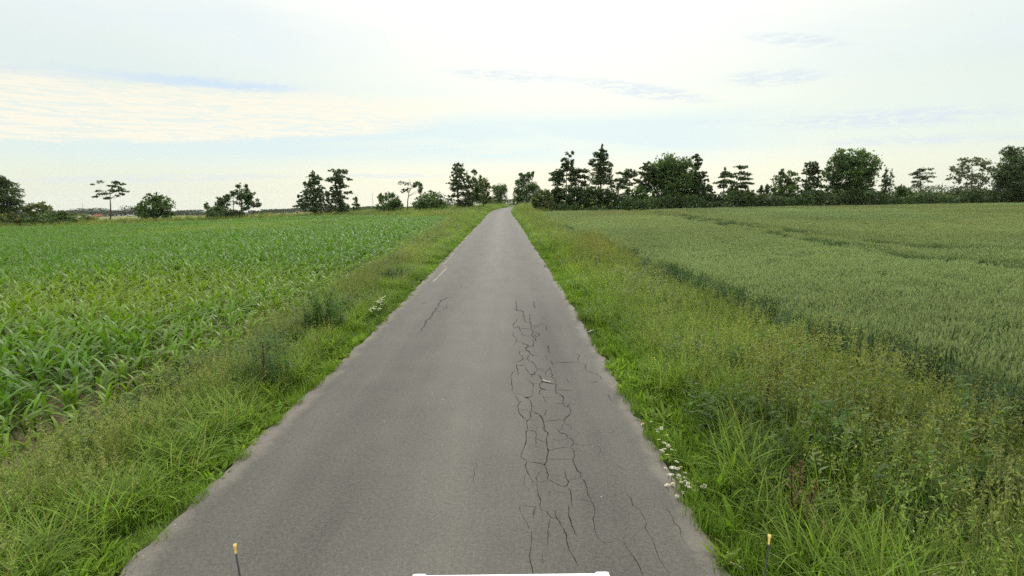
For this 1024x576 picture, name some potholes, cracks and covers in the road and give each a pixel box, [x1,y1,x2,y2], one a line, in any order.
crack [510,301,671,576]
